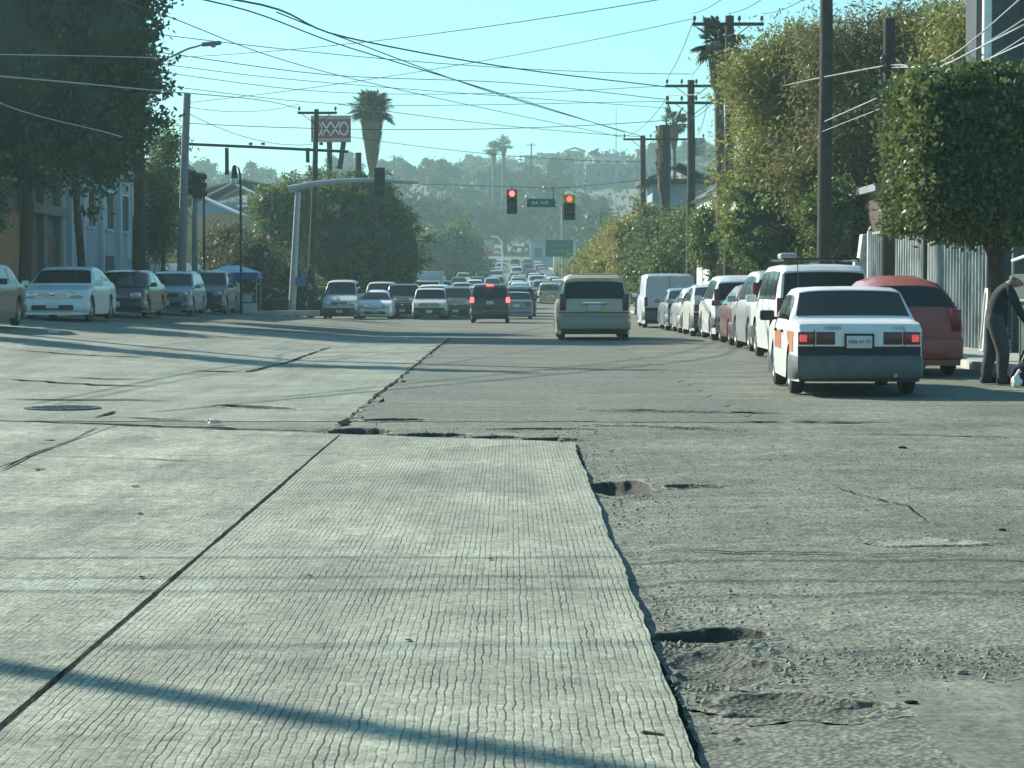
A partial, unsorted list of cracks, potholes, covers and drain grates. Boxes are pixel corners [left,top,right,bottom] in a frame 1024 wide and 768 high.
pothole [686,691,914,726]
pothole [588,479,662,499]
pothole [650,626,786,648]
crack [837,485,995,520]
pothole [660,643,786,692]
crack [610,408,1015,437]
